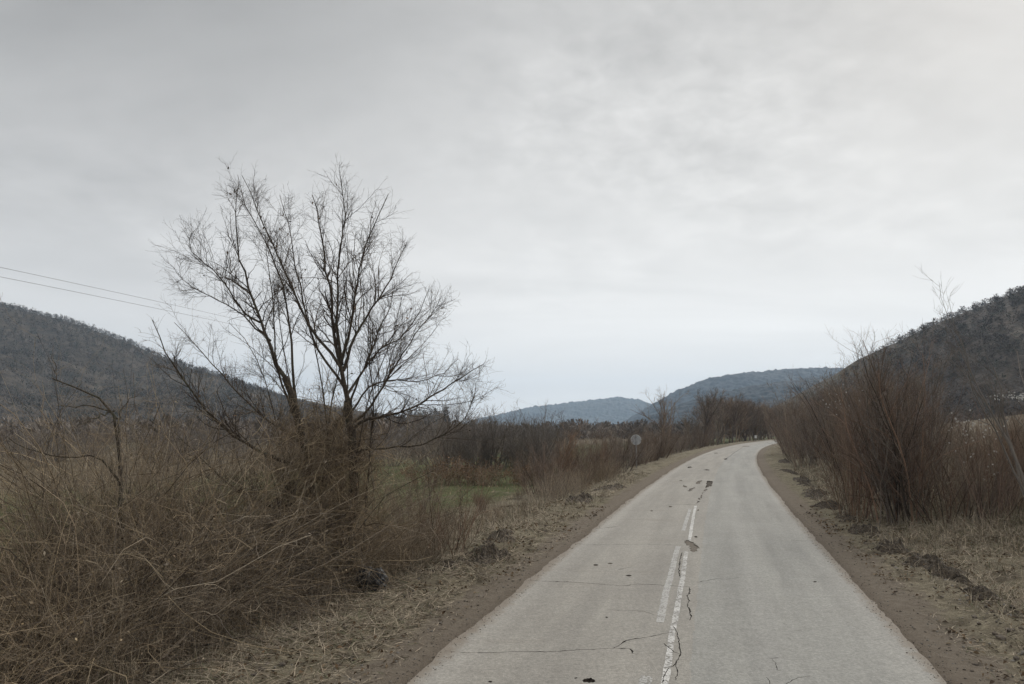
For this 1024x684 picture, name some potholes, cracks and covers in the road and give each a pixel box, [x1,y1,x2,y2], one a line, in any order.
crack [462,553,714,683]
